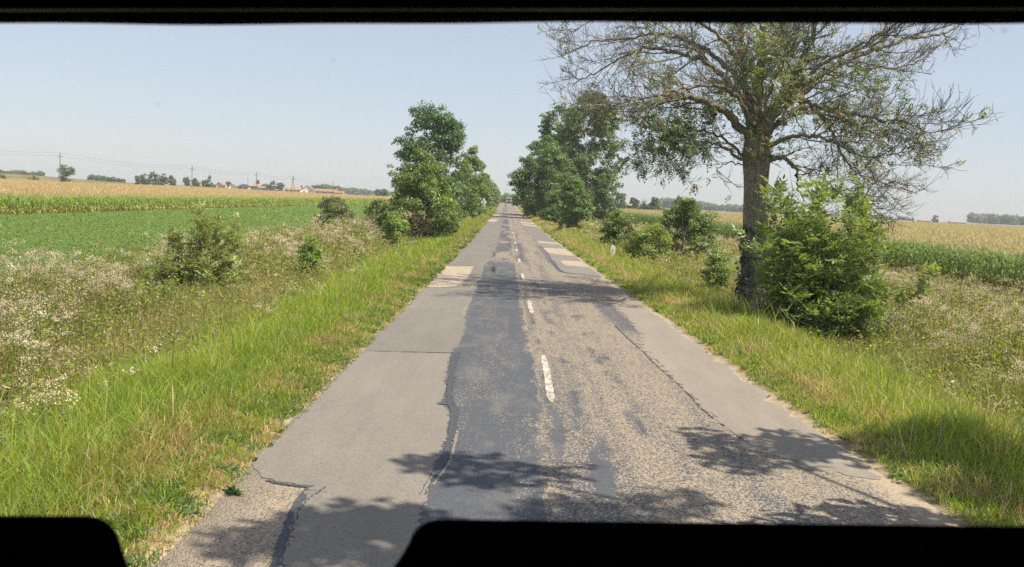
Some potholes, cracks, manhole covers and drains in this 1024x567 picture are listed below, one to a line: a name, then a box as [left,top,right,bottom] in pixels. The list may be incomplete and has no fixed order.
crack [615,325,748,442]
